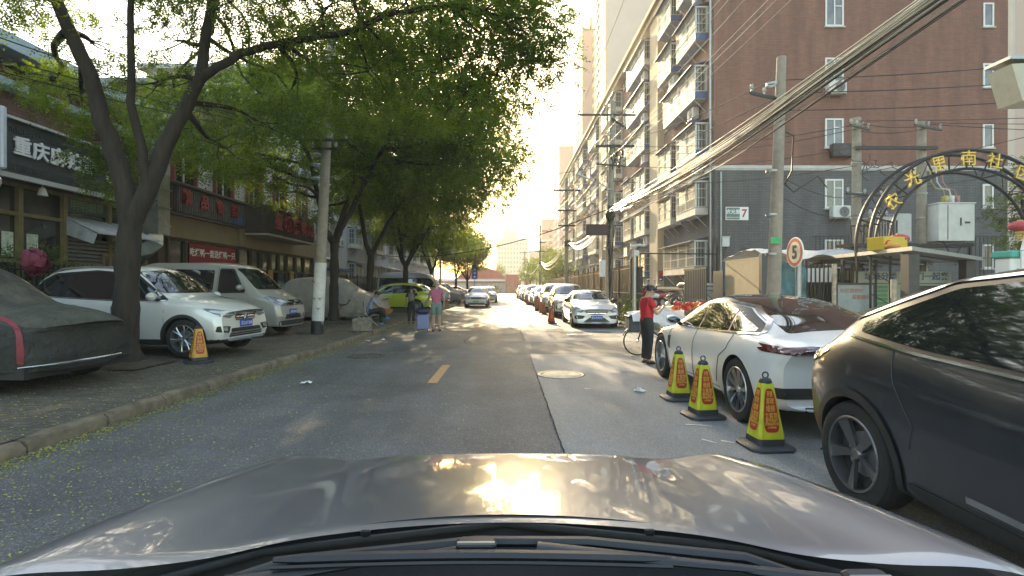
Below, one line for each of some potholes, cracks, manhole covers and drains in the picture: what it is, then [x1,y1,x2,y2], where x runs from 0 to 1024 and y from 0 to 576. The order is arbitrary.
manhole cover [537,370,585,379]
